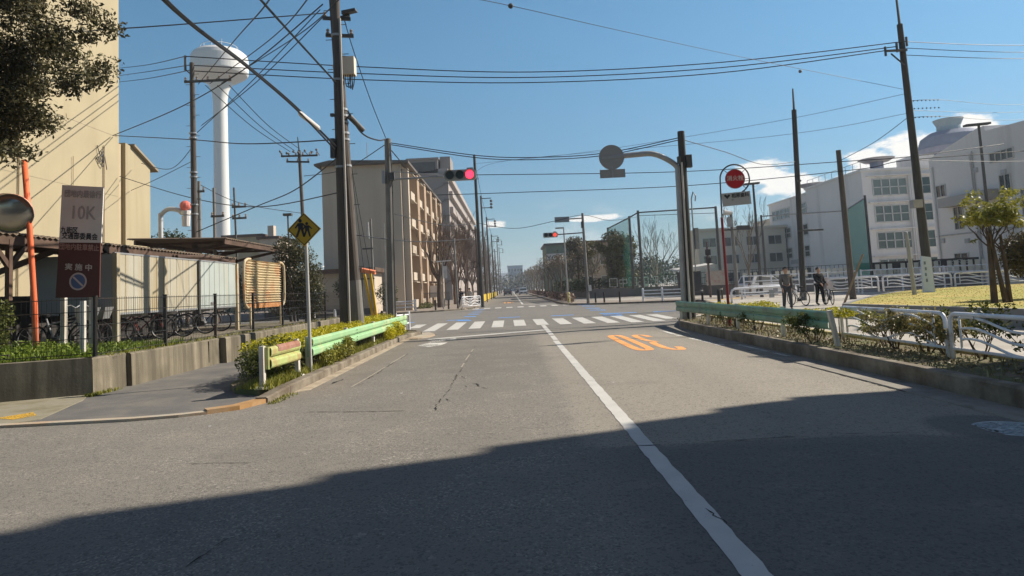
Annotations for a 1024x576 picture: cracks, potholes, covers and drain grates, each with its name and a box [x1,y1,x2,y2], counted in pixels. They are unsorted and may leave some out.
manhole cover [971,421,1024,436]
